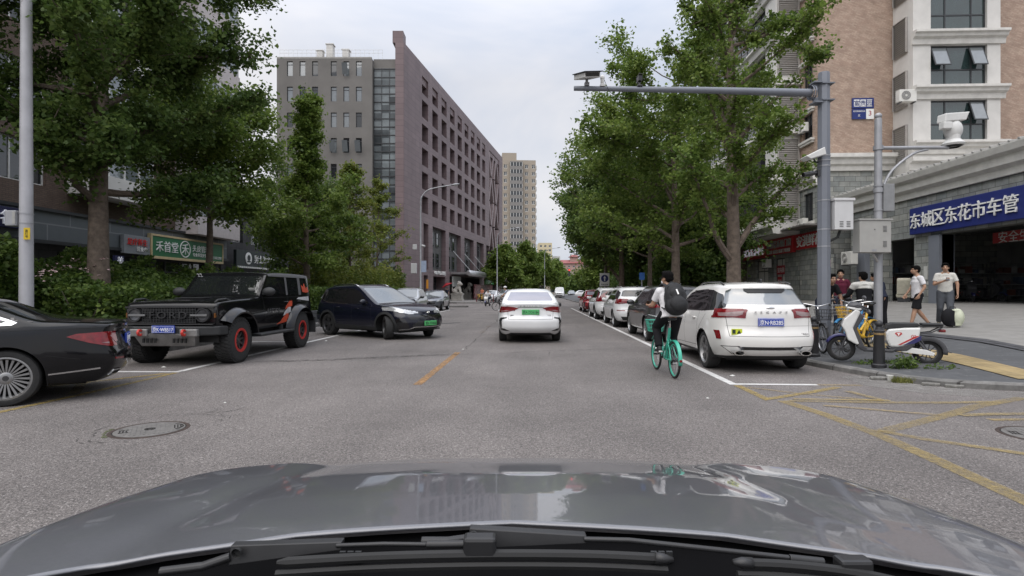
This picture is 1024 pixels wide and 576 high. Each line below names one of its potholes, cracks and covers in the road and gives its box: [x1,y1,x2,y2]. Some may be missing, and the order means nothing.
manhole cover [995,426,1024,440]
manhole cover [101,421,191,439]
